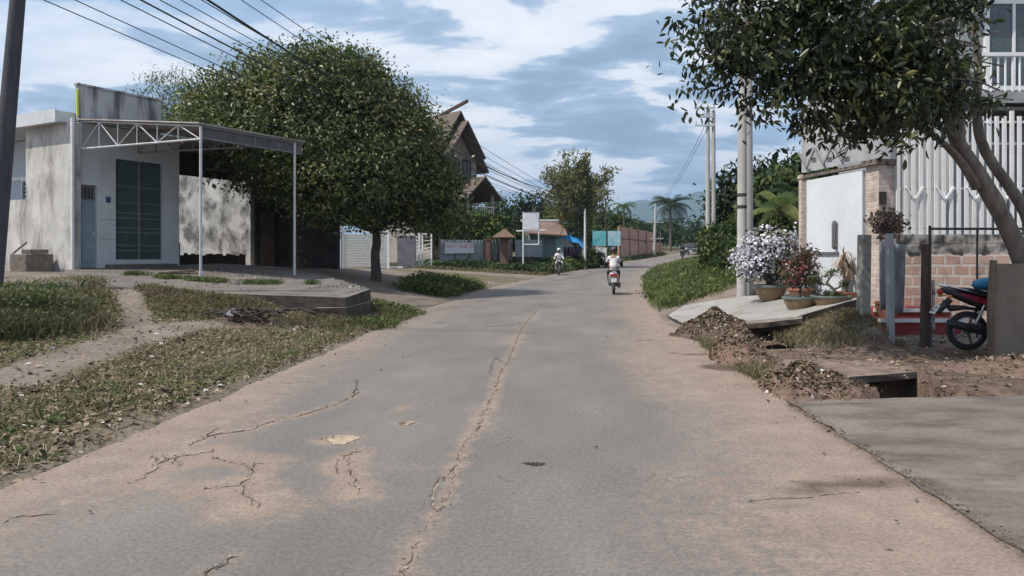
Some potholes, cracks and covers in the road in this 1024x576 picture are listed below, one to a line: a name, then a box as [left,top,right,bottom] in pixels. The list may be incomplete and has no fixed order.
crack [201,551,250,576]
crack [127,378,359,508]
crack [4,512,56,523]
crack [749,491,859,502]
pothole [319,435,360,445]
crack [399,313,536,576]
